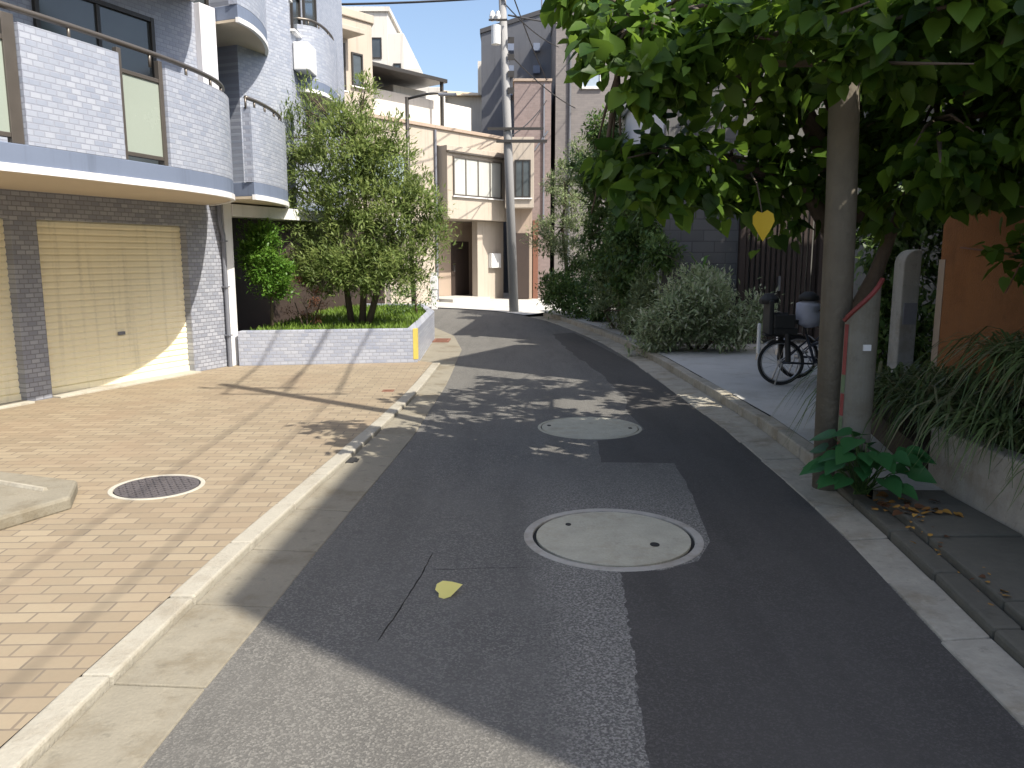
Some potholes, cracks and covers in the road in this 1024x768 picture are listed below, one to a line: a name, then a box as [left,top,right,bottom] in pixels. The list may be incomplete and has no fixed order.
manhole cover [538,417,642,439]
crack [377,553,517,642]
manhole cover [107,474,205,500]
manhole cover [524,508,704,572]
